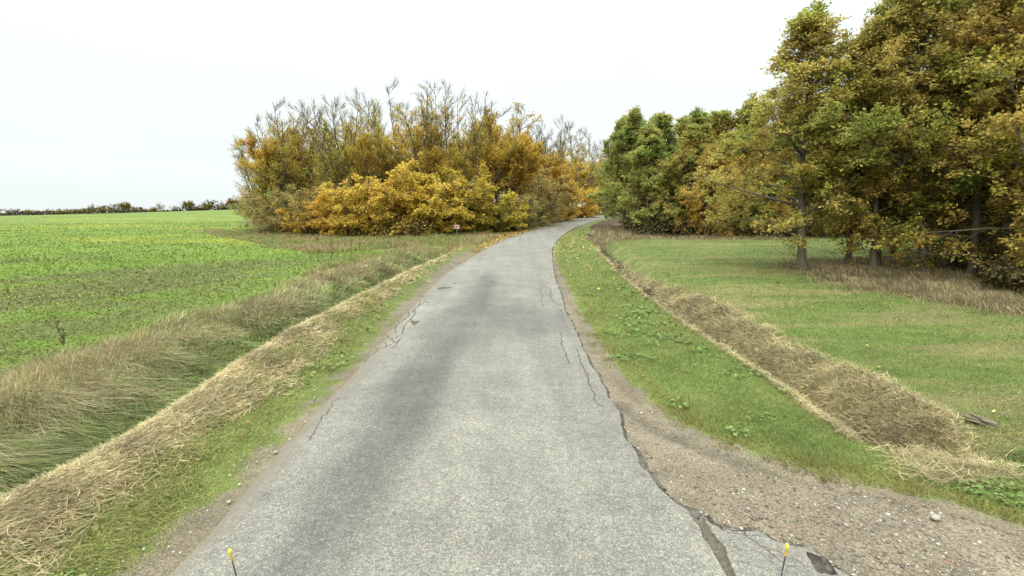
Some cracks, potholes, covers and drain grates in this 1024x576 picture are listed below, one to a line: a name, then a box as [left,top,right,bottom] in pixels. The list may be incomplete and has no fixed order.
pothole [807,552,838,575]
crack [540,217,851,576]
crack [364,295,426,363]
